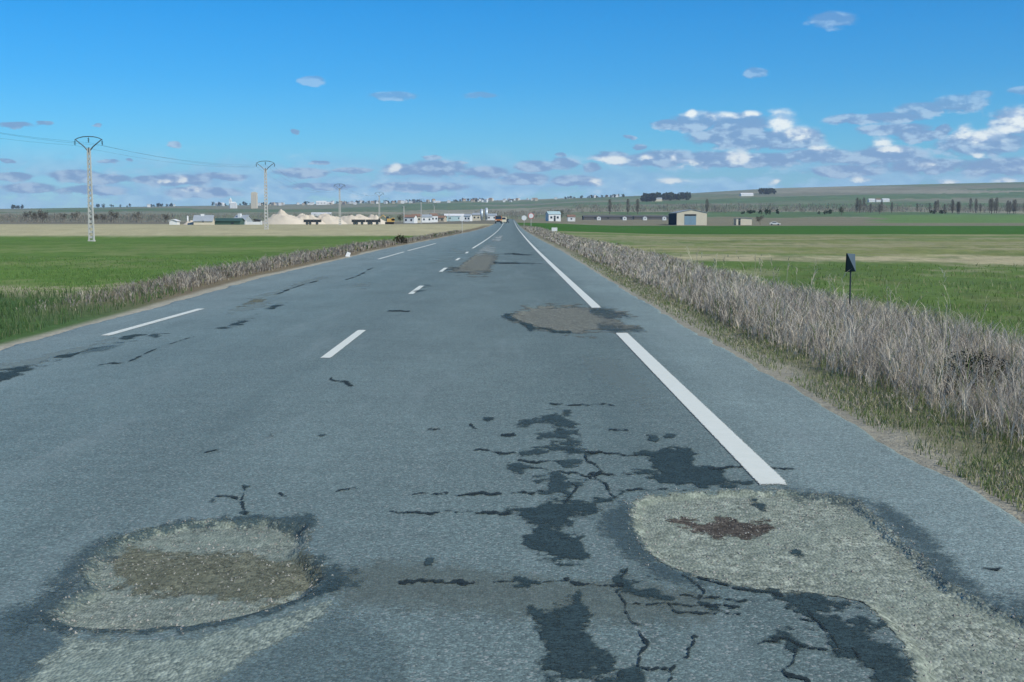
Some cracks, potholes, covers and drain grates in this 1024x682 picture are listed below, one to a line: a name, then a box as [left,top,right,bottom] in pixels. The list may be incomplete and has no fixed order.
crack [640,634,699,681]
crack [545,568,783,625]
crack [393,433,669,515]
pothole [0,513,363,682]
